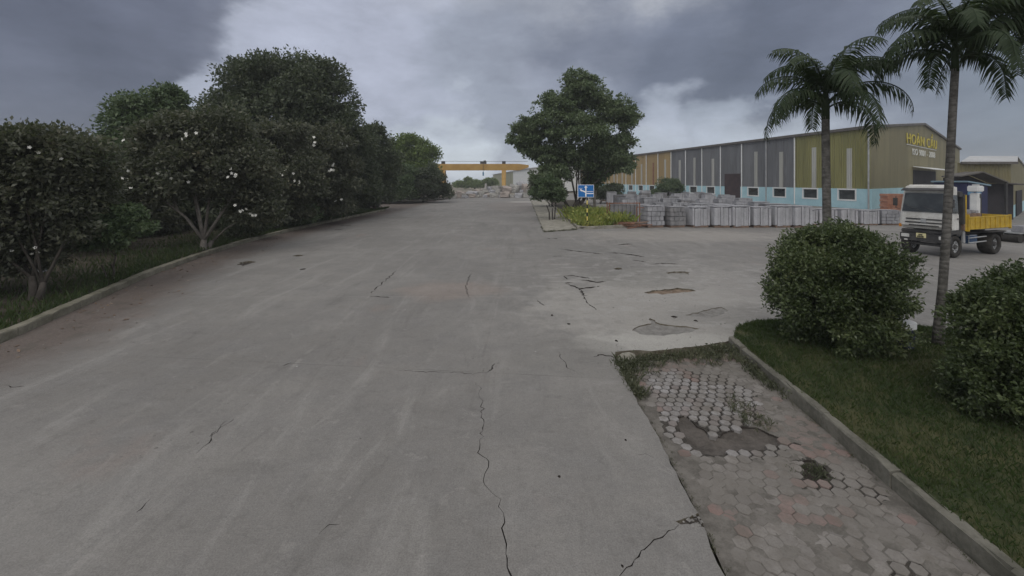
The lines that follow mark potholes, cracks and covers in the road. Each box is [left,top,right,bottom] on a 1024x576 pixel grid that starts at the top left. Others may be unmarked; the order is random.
crack [477,385,512,576]
pothole [801,460,828,483]
pothole [678,416,779,456]
crack [565,275,604,309]
crack [619,529,674,576]
